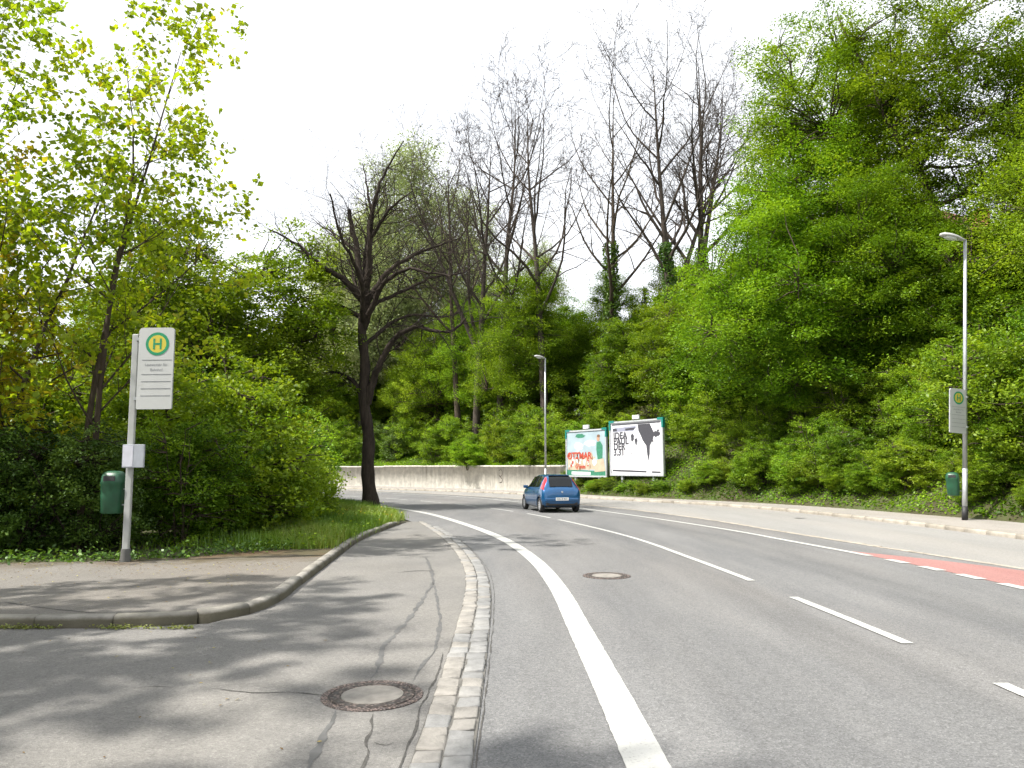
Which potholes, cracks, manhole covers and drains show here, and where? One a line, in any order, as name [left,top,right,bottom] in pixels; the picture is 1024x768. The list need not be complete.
crack [360,570,443,768]
manhole cover [320,680,423,712]
crack [215,688,336,768]
